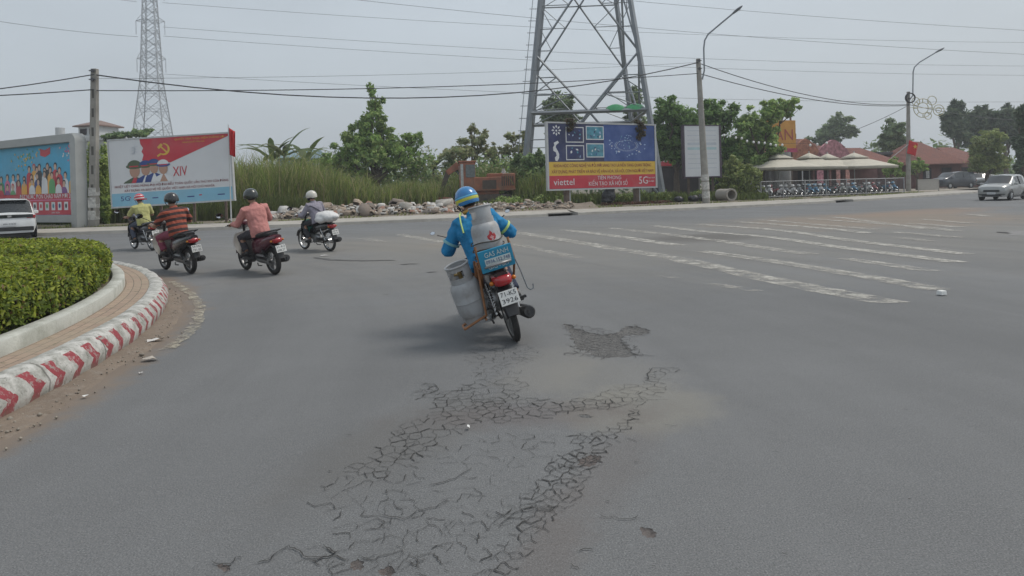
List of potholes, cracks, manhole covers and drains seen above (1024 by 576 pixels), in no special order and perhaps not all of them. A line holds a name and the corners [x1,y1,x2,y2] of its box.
crack [259,324,678,576]
pothole [563,324,650,358]
pothole [640,527,657,538]
